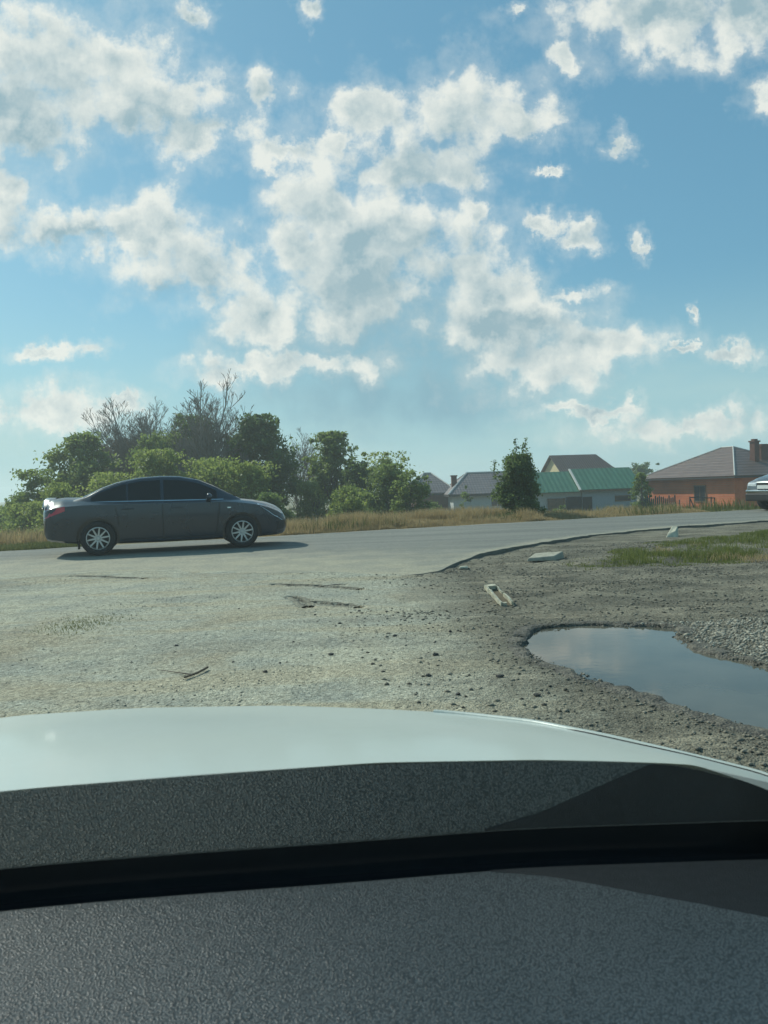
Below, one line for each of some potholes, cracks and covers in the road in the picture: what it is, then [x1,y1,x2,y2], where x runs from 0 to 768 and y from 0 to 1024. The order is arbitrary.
crack [275,583,363,608]
pothole [507,621,768,738]
